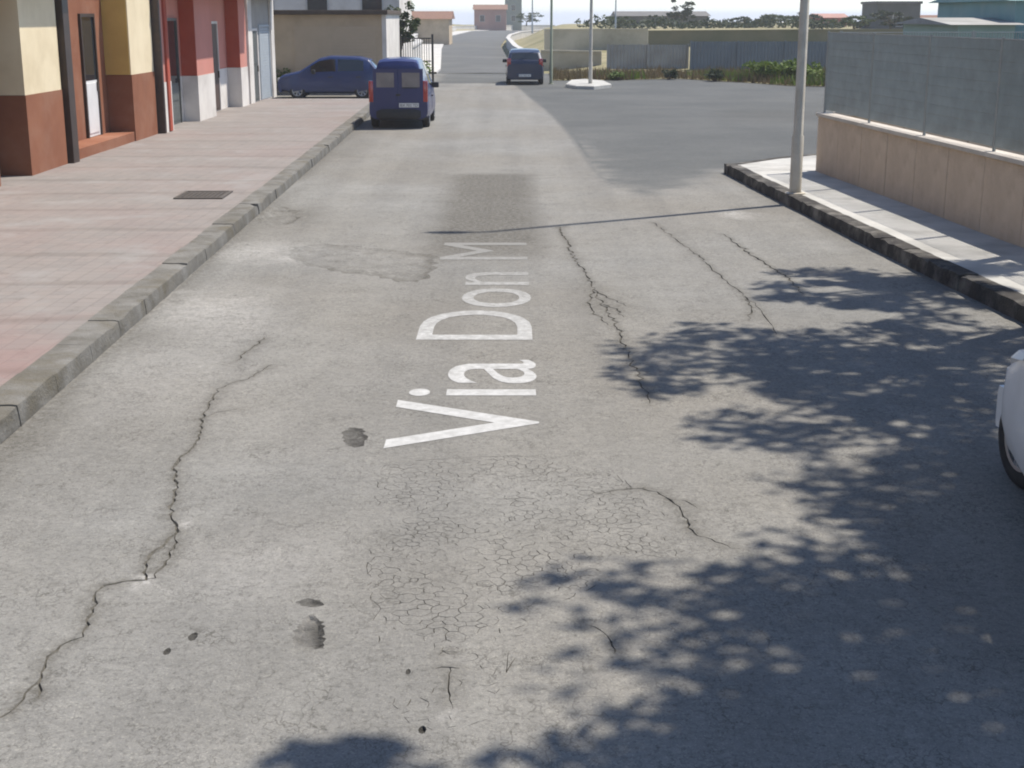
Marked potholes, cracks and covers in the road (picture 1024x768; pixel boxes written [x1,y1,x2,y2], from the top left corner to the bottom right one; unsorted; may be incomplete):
crack [0,337,270,718]
pothole [342,428,368,448]
pothole [292,614,326,649]
crack [558,227,650,404]
crack [655,223,777,334]
crack [366,455,729,730]
pothole [296,598,324,607]
crack [726,236,800,292]
manhole cover [173,191,233,199]
